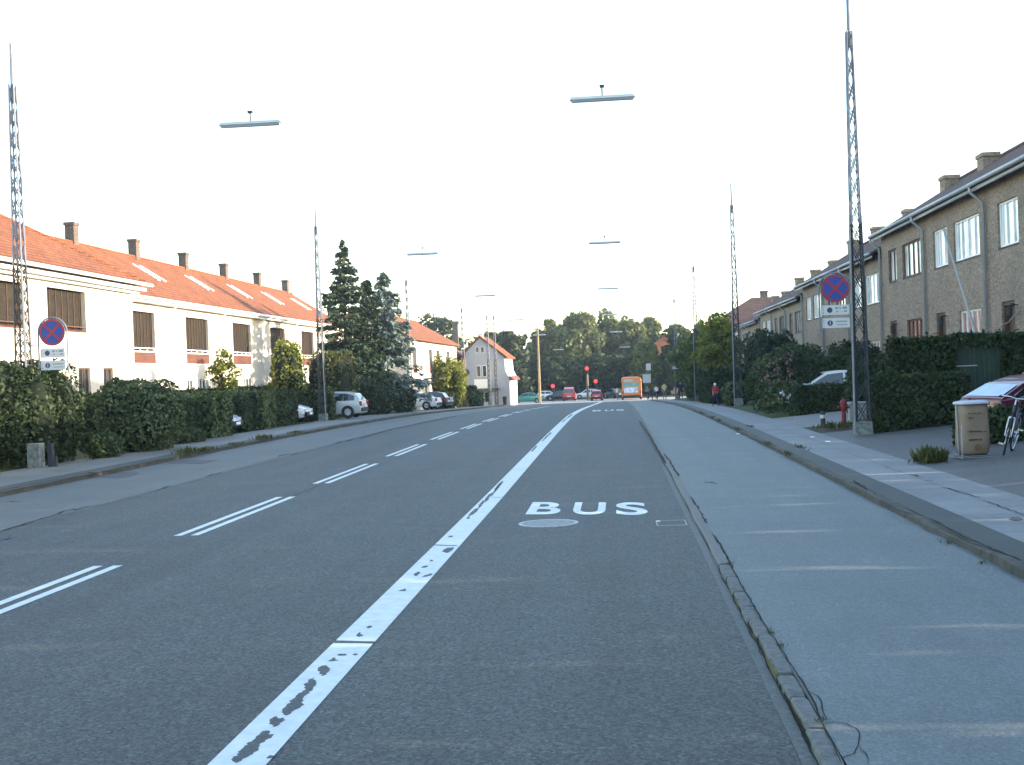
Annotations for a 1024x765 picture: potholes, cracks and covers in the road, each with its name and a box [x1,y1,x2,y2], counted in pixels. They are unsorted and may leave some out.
manhole cover [518,519,579,527]
